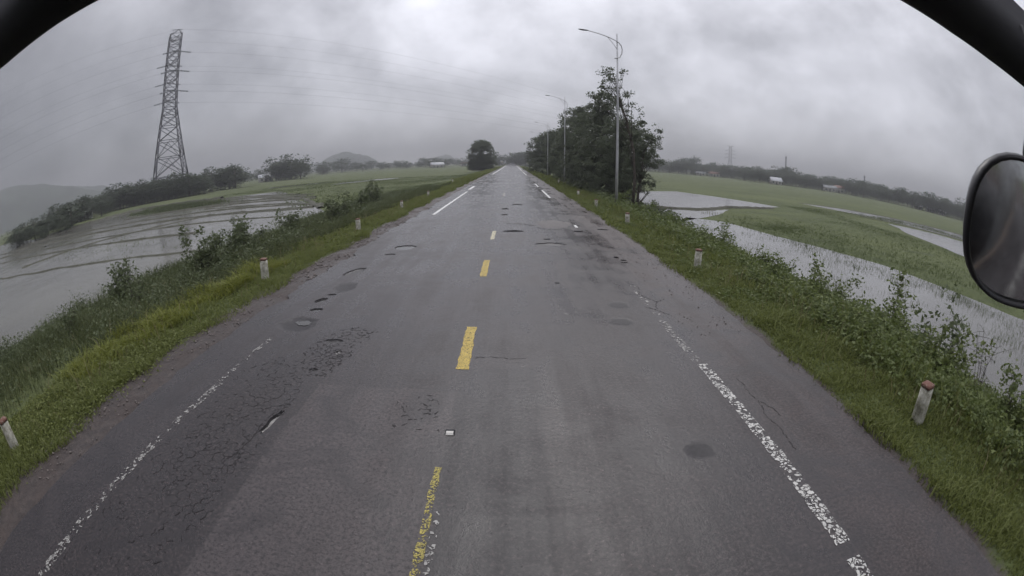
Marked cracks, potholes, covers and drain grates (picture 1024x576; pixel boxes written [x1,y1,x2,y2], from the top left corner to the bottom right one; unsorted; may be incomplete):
crack [63,357,305,575]
pothole [259,410,285,434]
pothole [275,316,320,332]
